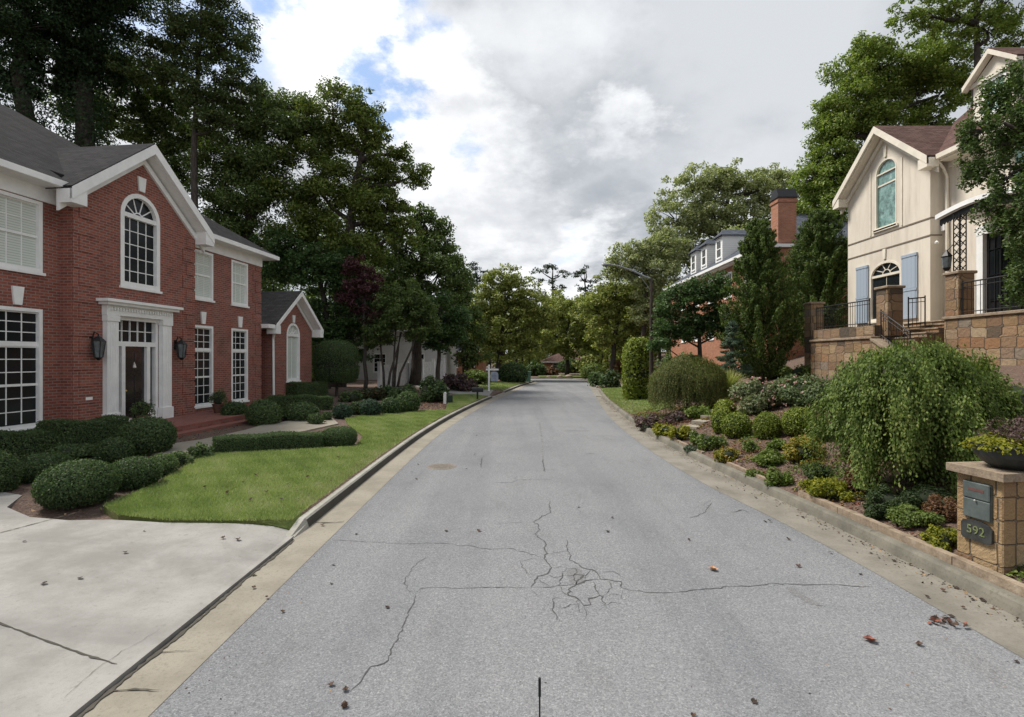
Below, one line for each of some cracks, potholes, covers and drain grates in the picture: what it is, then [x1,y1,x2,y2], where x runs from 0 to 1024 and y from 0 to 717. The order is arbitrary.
crack [346,502,866,690]
